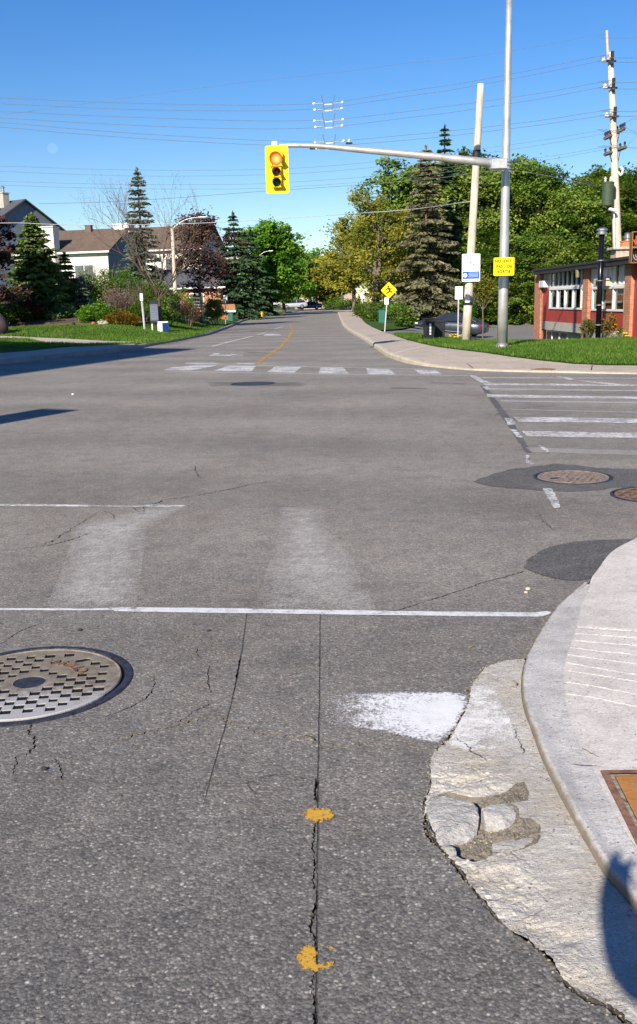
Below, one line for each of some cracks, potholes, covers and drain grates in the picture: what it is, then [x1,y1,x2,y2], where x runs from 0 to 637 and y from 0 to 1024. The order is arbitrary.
crack [376,571,523,617]
manhole cover [610,487,637,502]
crack [104,613,631,1024]
manhole cover [0,646,133,727]
crack [13,725,64,780]
manhole cover [533,470,614,484]
pothole [428,813,541,862]
pothole [425,782,529,827]
